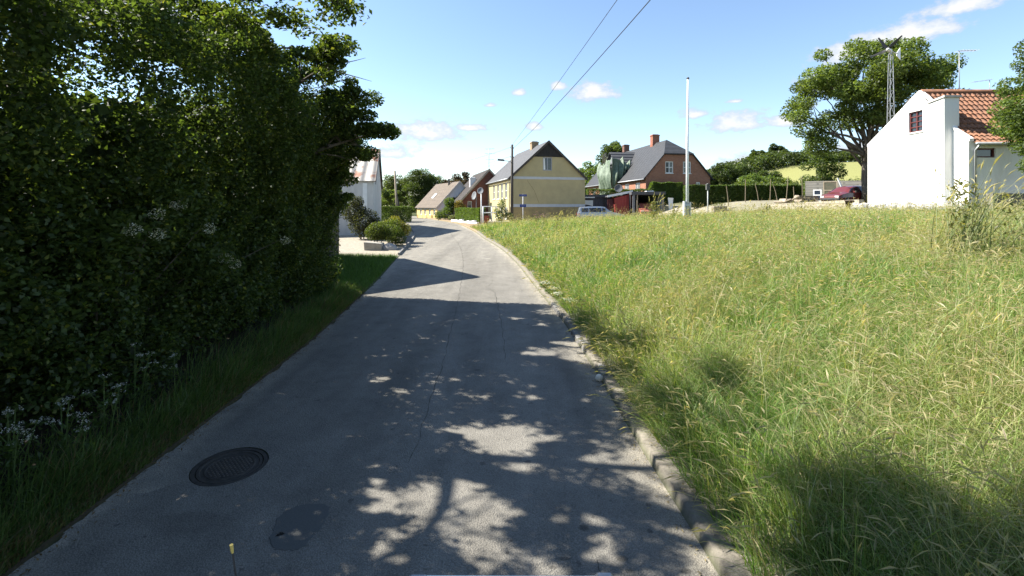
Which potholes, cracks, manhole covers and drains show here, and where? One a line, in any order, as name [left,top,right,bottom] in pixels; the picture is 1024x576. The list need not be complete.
manhole cover [189,448,269,487]
crack [410,234,464,458]
